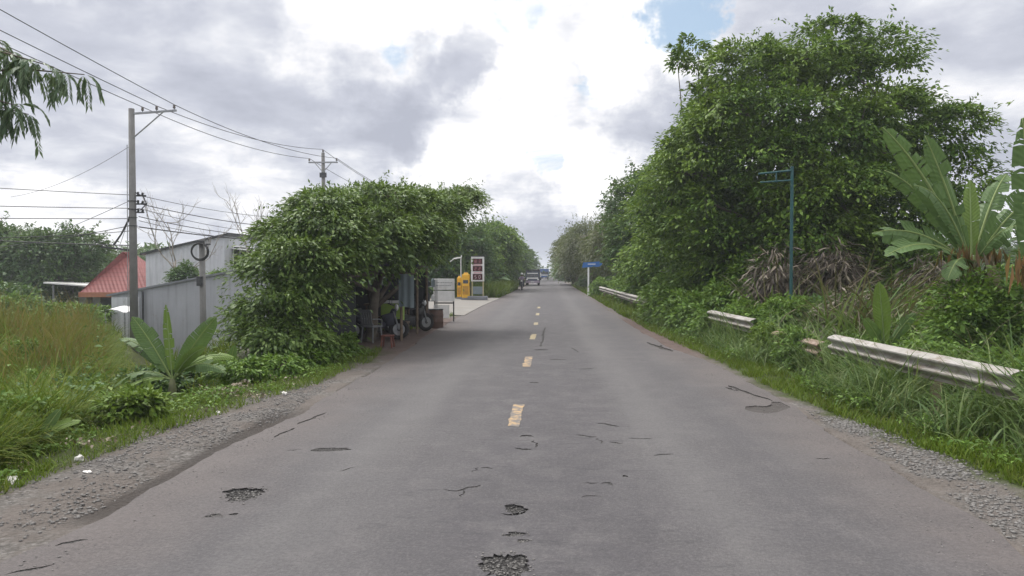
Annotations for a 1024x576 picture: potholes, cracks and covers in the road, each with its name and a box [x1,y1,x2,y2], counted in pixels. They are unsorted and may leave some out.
pothole [500,503,533,515]
pothole [502,531,532,543]
crack [725,386,772,401]
crack [274,413,325,437]
pothole [475,550,535,576]
crack [580,423,670,456]
pothole [219,486,268,505]
crack [444,467,493,497]
